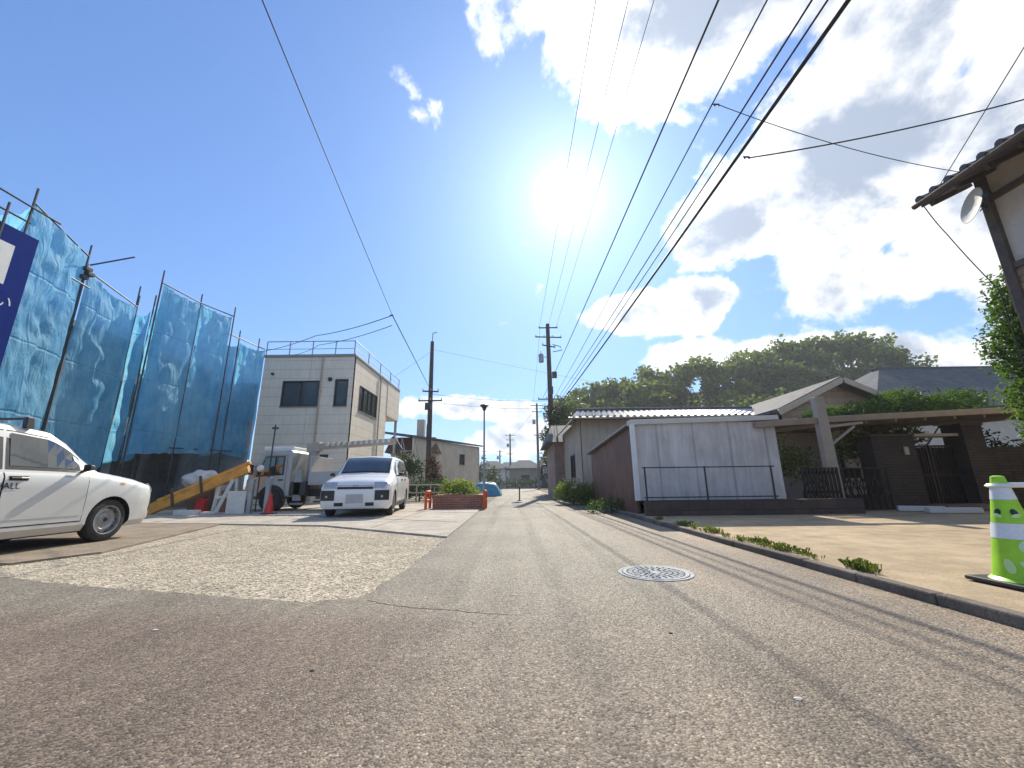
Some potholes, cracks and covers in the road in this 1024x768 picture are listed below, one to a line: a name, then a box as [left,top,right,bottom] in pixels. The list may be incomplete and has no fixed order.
manhole cover [618,565,695,582]
